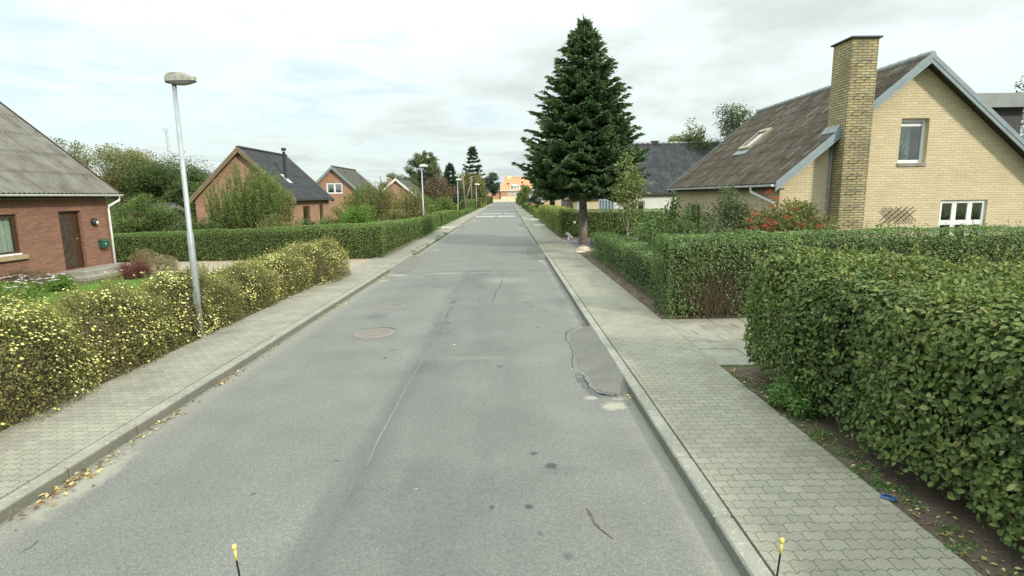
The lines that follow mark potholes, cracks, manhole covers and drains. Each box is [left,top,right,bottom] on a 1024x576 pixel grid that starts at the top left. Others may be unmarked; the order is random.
crack [345,307,451,507]
manhole cover [354,329,393,338]
